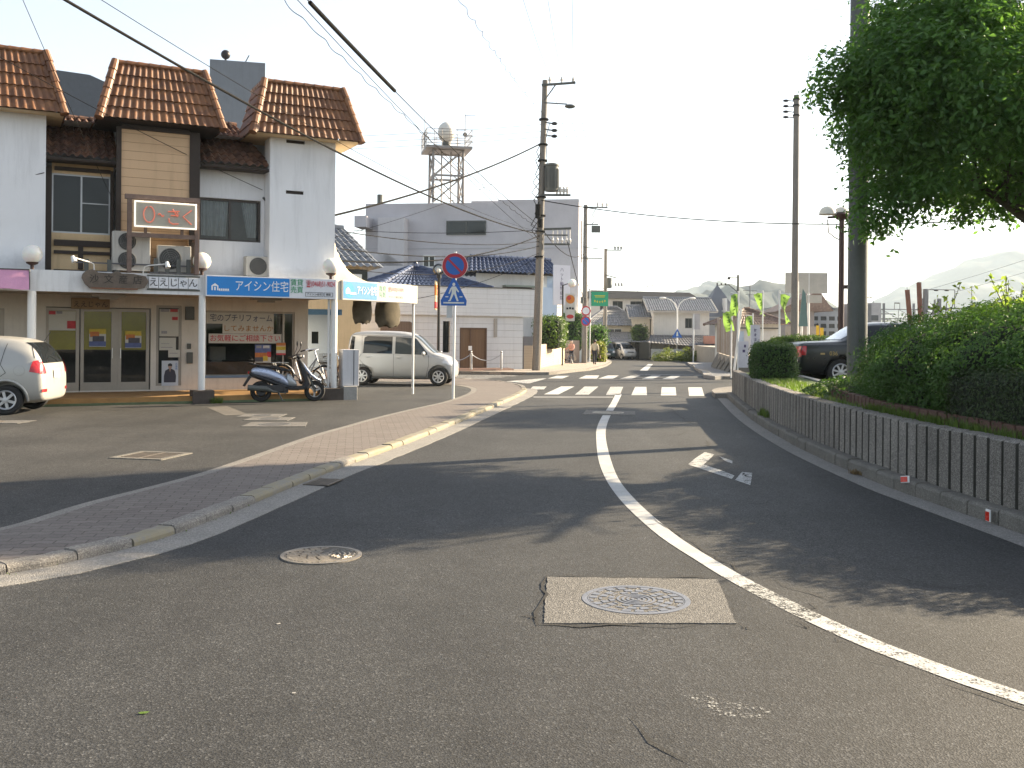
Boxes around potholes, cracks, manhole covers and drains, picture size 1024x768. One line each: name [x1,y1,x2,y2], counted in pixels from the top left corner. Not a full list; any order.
crack [632,717,693,763]
manhole cover [280,546,362,565]
manhole cover [544,577,736,624]
drain grate [108,451,192,460]
drain grate [303,478,344,486]
